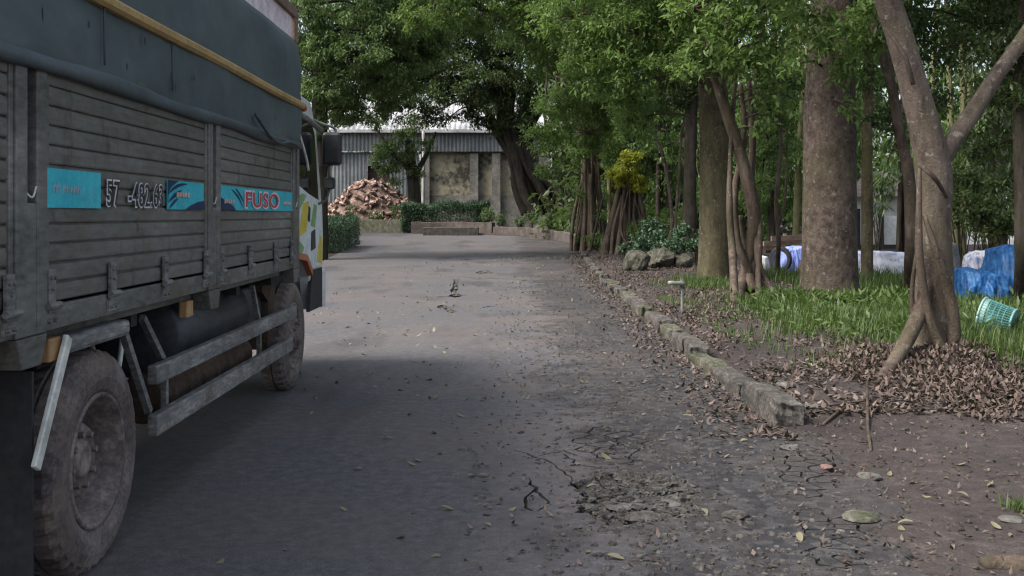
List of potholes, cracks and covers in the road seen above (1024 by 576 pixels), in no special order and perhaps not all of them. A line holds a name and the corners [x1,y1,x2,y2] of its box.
crack [778,444,876,568]
pothole [568,470,701,526]
crack [510,426,649,511]
